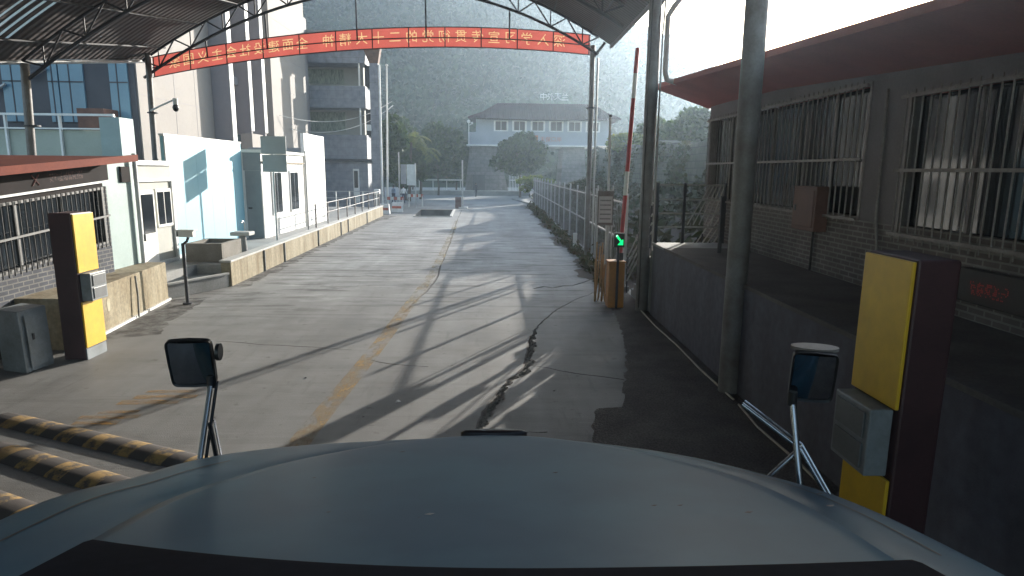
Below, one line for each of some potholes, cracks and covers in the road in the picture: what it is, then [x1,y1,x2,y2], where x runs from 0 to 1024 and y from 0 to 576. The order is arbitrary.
crack [475,280,624,433]
